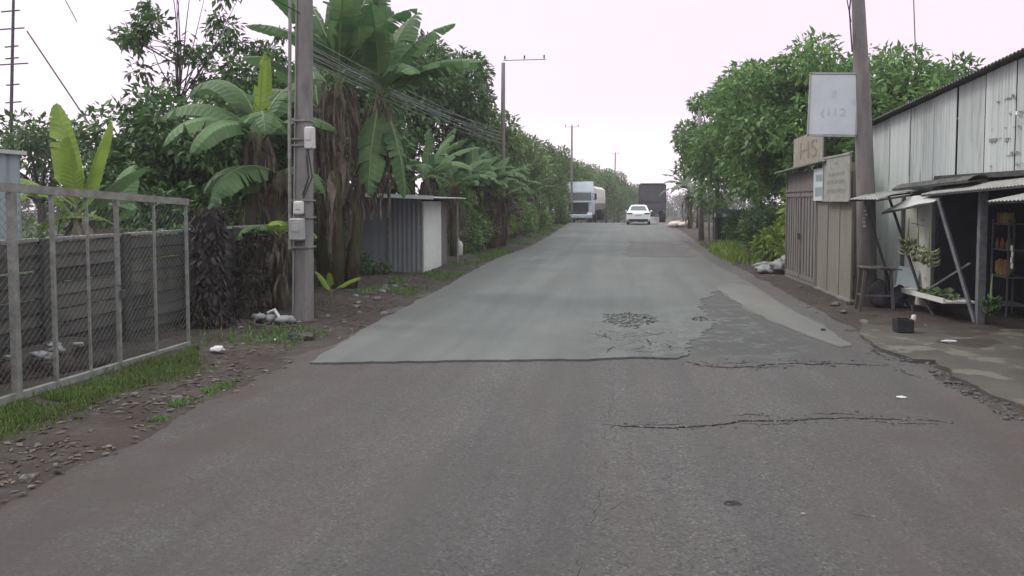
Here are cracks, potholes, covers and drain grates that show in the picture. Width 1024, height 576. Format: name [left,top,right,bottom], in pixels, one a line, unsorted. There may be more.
crack [576,369,960,576]
crack [579,328,920,378]
pothole [602,312,659,329]
